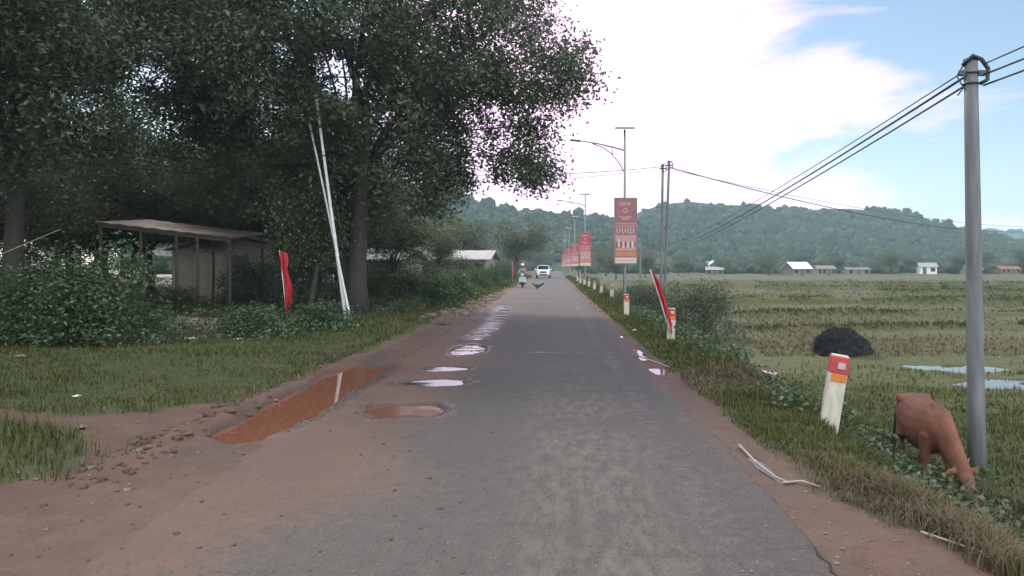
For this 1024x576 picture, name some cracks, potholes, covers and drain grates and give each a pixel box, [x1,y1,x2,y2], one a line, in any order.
pothole [358,401,452,419]
pothole [448,344,488,356]
pothole [392,377,472,387]
